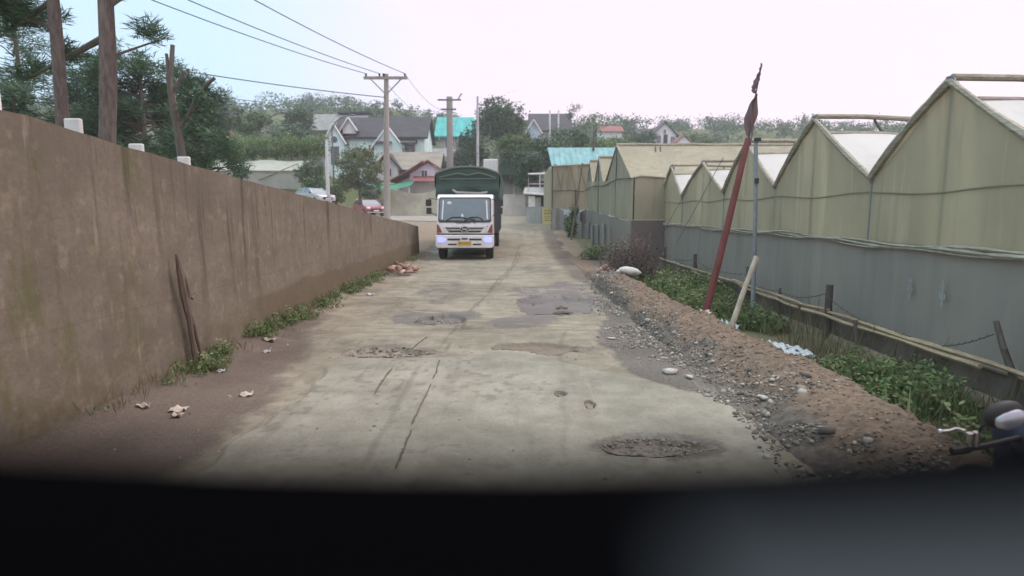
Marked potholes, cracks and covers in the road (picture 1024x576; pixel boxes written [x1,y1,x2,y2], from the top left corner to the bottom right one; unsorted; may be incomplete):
crack [403,360,440,450]
pothole [599,437,710,449]
pothole [414,314,466,325]
pothole [345,346,439,358]
